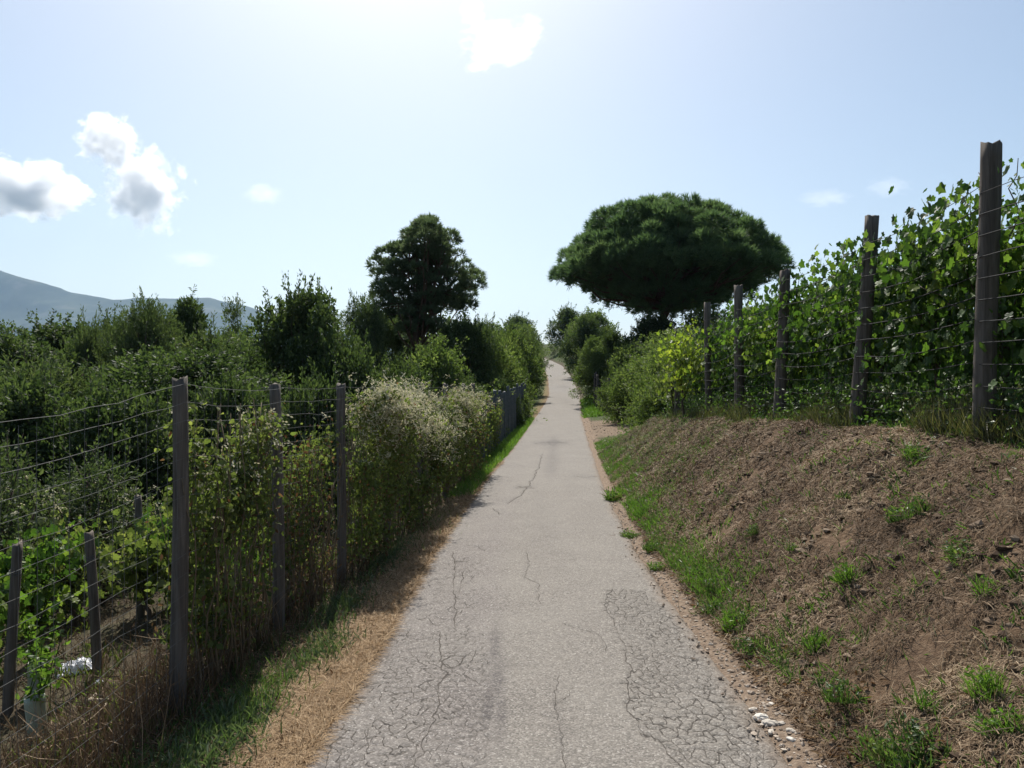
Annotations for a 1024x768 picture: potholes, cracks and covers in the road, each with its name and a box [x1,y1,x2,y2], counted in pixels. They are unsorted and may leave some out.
crack [325,549,493,768]
crack [553,676,570,767]
